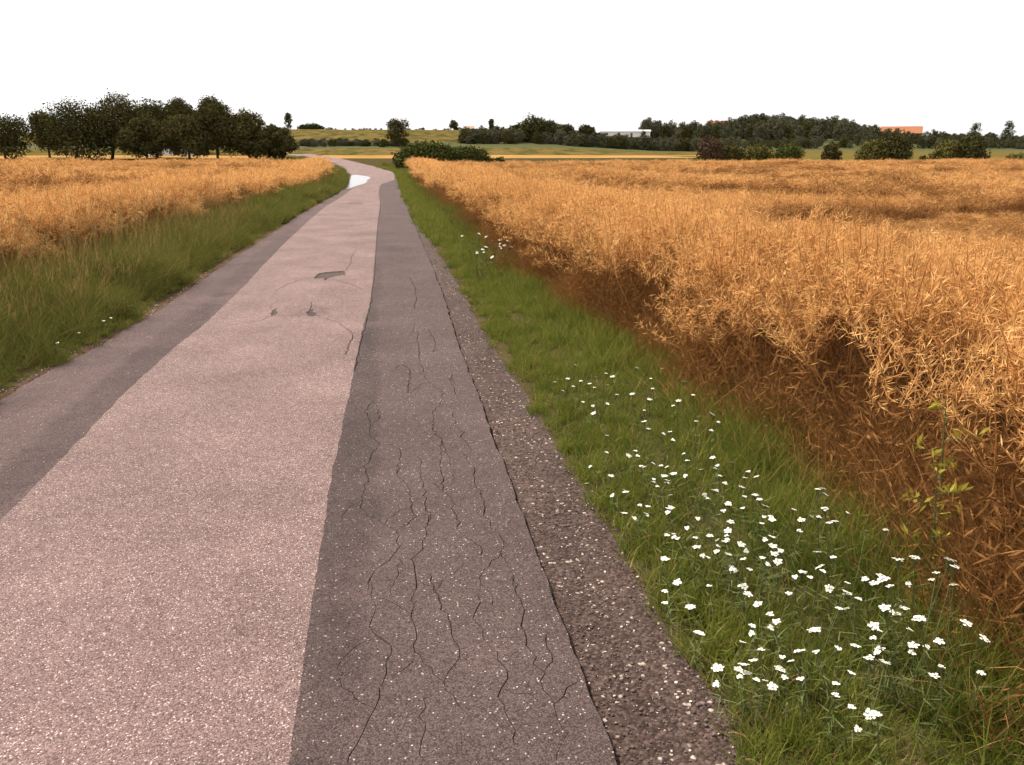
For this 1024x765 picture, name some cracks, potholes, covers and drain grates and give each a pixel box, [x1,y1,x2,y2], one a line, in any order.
crack [337,277,589,765]
pothole [315,271,345,280]
